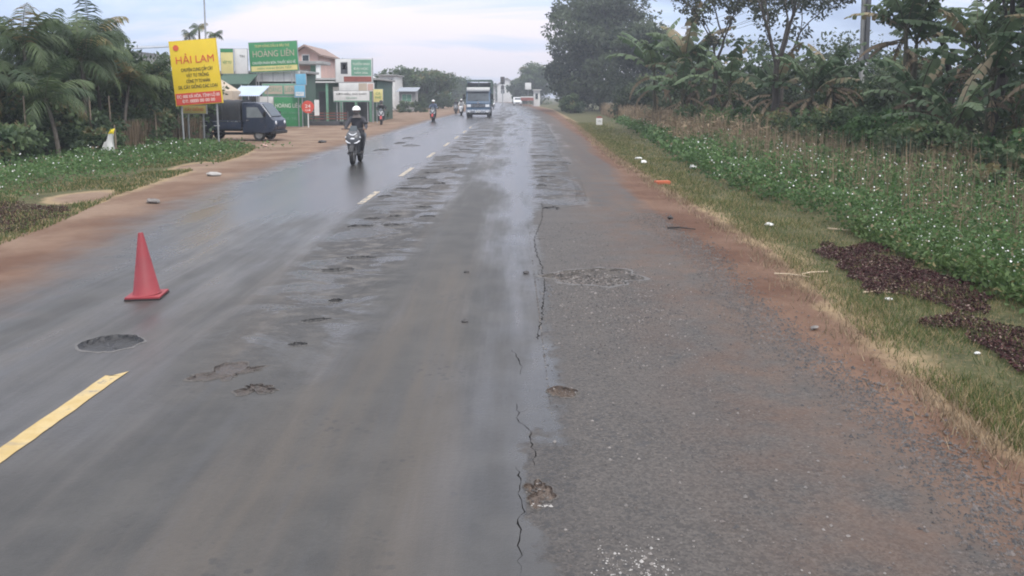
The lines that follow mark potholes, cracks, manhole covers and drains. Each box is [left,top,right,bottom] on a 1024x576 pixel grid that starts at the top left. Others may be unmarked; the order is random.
crack [512,204,548,372]
pothole [522,478,559,511]
crack [516,409,540,574]
pothole [183,361,269,382]
pothole [545,385,580,399]
pothole [74,334,147,353]
pothole [231,383,279,396]
pothole [536,267,650,288]
